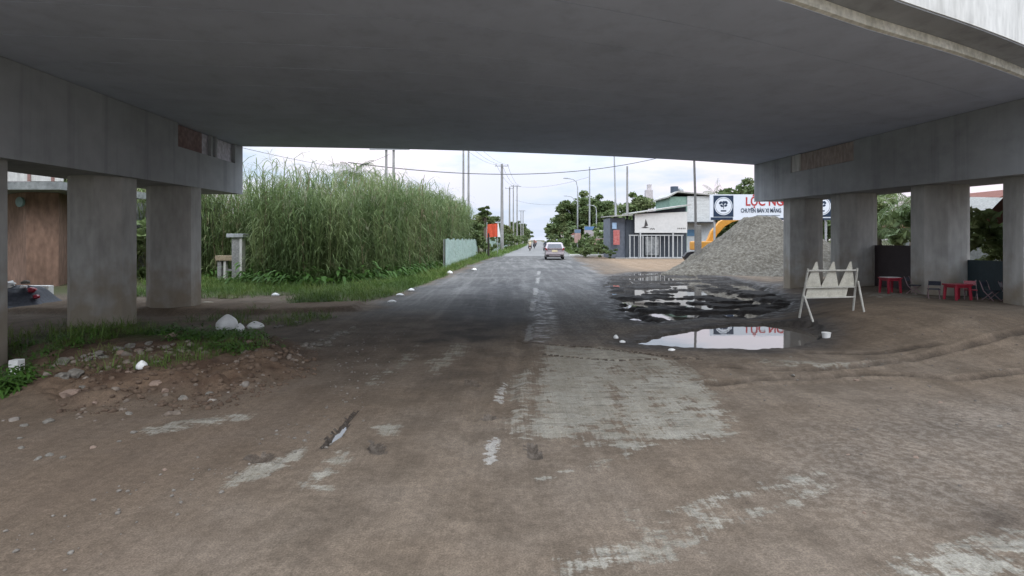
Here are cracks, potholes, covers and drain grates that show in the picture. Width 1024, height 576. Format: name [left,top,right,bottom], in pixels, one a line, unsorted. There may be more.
pothole [523,443,543,460]
pothole [320,410,360,449]
pothole [367,440,388,455]
pothole [601,272,801,323]
pothole [632,321,827,349]
